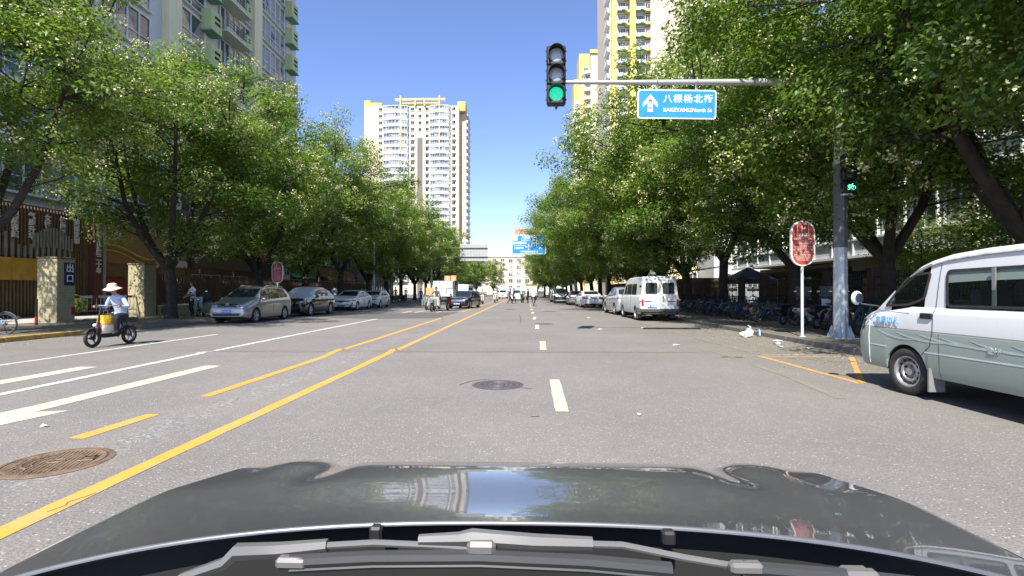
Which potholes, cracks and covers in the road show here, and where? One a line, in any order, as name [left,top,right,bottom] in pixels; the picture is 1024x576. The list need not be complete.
manhole cover [0,447,116,480]
manhole cover [472,380,524,390]
